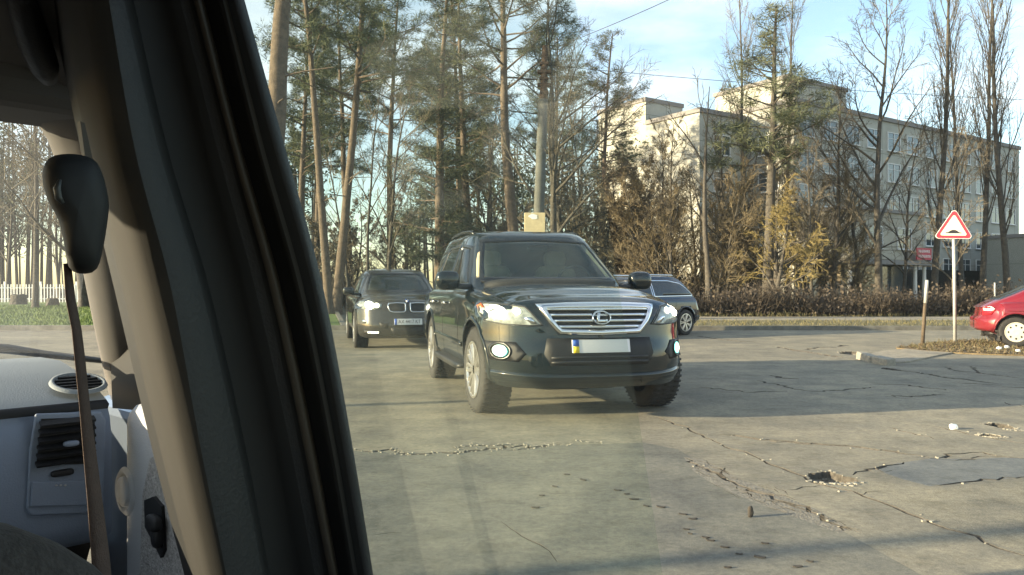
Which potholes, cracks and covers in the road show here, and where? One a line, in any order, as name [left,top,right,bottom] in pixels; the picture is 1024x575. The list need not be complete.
pothole [805,469,864,486]
crack [702,367,1024,407]
crack [685,425,1024,533]
pothole [985,422,1024,431]
crack [502,522,573,564]
crack [354,440,603,456]
